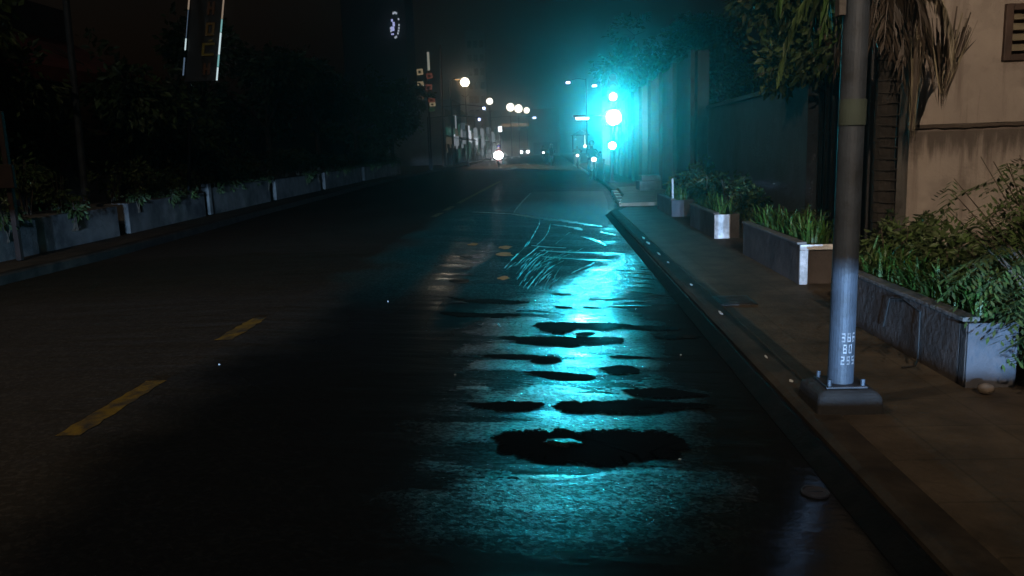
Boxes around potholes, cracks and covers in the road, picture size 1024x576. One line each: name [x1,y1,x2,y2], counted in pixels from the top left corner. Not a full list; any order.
pothole [623,387,709,399]
pothole [530,355,562,364]
pothole [533,321,636,335]
pothole [490,427,692,468]
pothole [502,335,625,347]
pothole [525,371,596,381]
pothole [551,398,716,415]
crack [480,212,622,261]
pothole [468,400,546,411]
manhole cover [801,485,830,499]
pothole [599,365,640,375]
